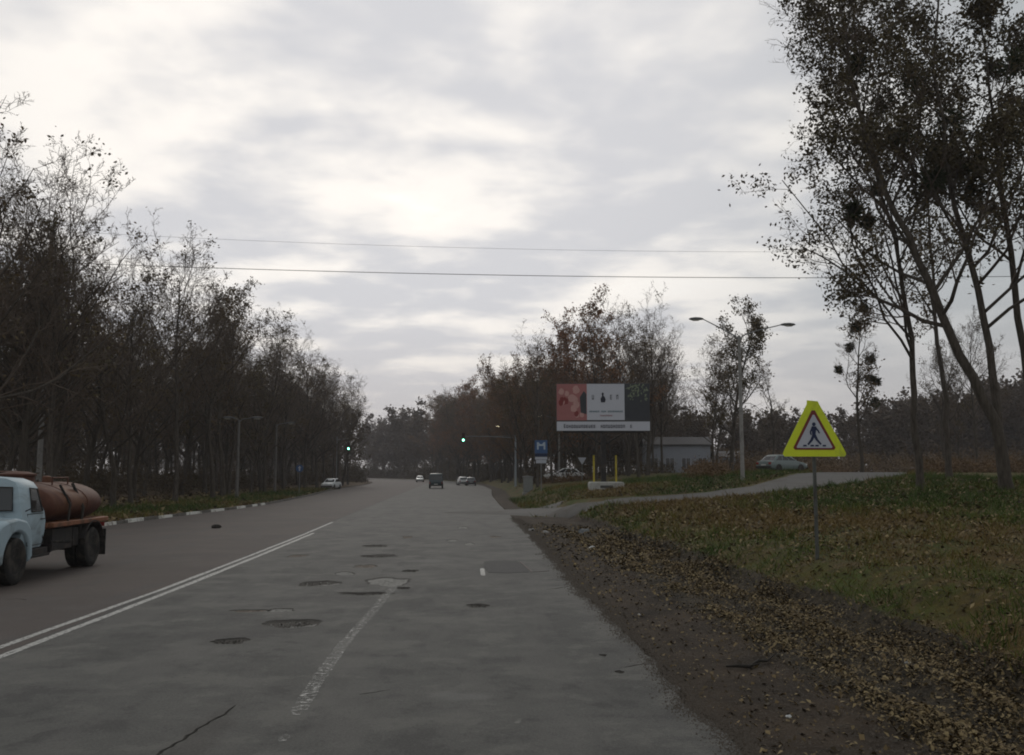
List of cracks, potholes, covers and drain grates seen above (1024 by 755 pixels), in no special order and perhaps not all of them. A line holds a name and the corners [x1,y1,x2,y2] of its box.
pothole [261,619,322,628]
crack [156,705,236,755]
